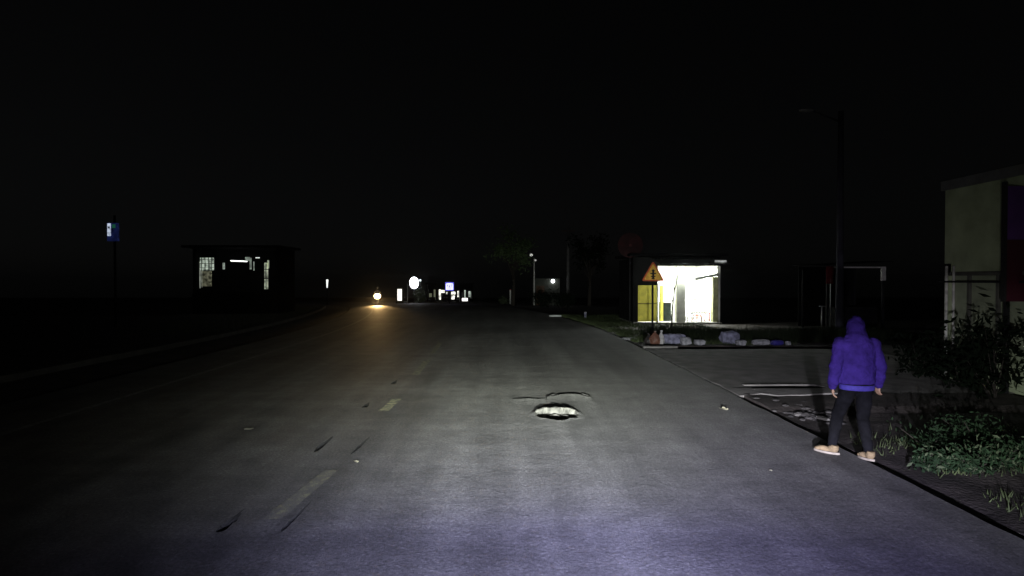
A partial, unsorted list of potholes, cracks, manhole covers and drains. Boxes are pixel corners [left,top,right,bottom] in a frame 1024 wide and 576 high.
crack [280,502,311,532]
crack [314,436,333,452]
crack [215,509,244,532]
pothole [528,406,585,423]
